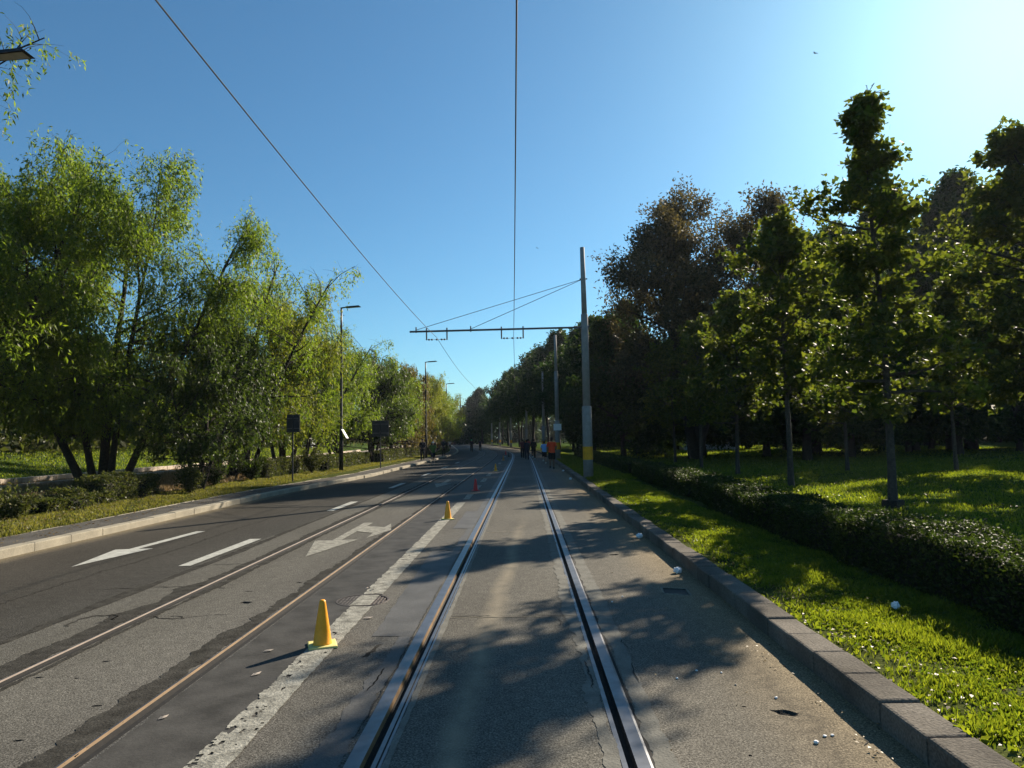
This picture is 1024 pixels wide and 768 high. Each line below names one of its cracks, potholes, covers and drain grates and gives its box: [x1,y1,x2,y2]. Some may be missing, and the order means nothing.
pothole [771,709,799,717]
crack [355,584,442,736]
manhole cover [336,594,389,606]
